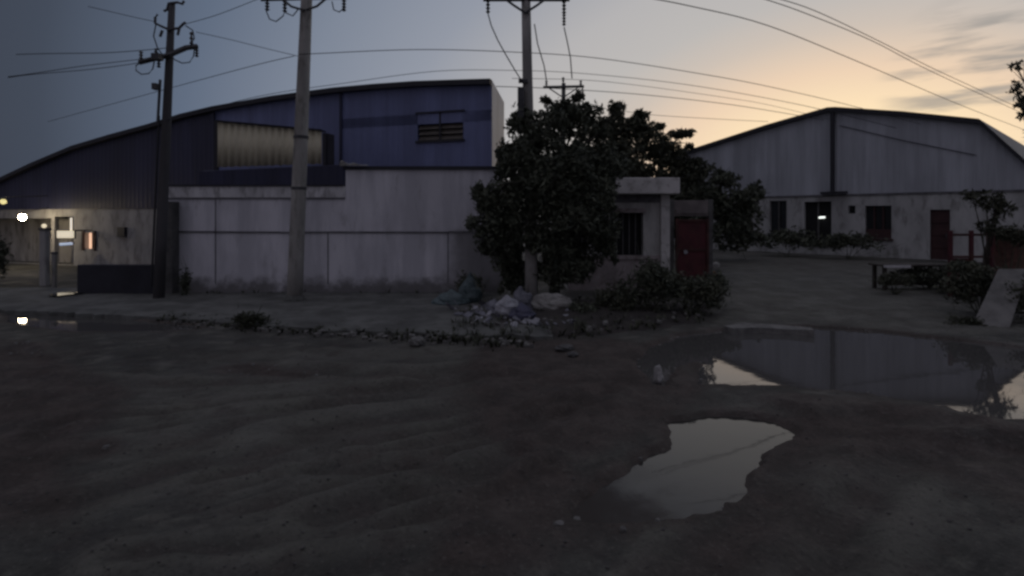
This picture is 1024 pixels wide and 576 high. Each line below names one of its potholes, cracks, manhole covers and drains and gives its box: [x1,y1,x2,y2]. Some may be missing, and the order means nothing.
pothole [628,324,1024,419]
pothole [561,409,807,523]
